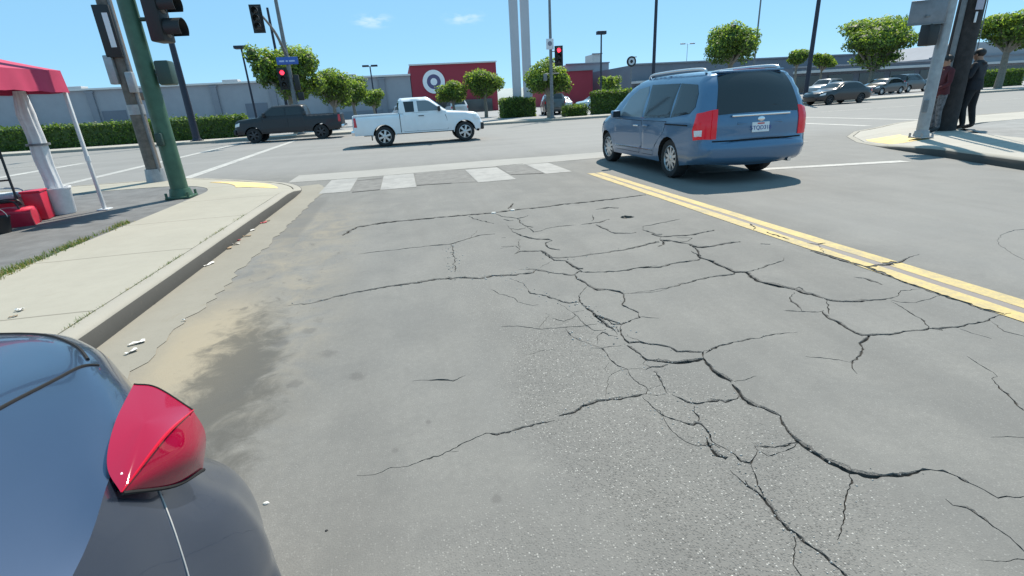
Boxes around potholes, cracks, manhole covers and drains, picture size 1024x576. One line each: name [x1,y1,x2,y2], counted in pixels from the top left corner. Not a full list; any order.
crack [289,195,1024,576]
